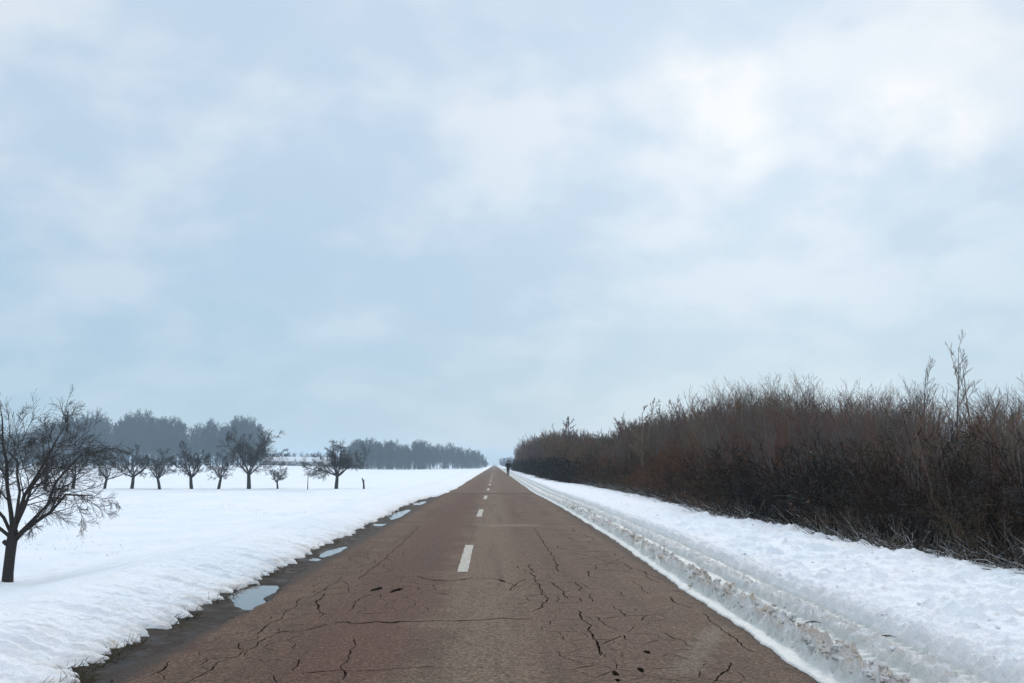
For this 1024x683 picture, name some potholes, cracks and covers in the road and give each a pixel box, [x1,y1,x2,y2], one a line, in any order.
crack [147,528,762,683]
